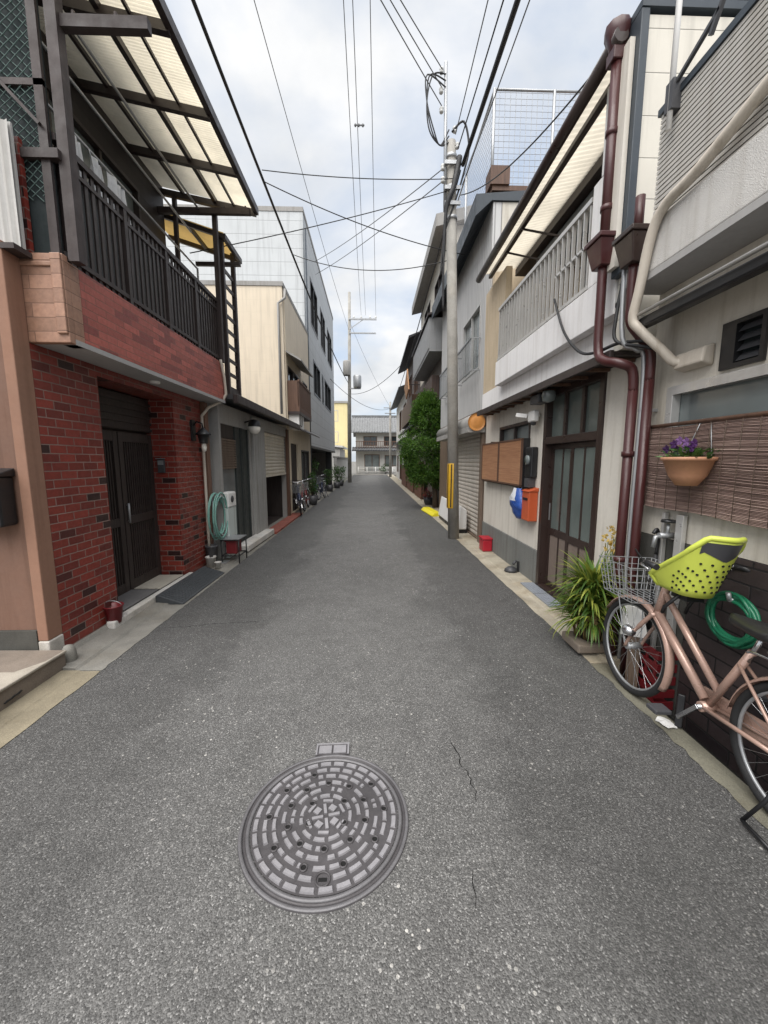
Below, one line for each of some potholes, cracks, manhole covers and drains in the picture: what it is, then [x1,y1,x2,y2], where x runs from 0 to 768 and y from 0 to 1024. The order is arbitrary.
manhole cover [238,742,409,914]
